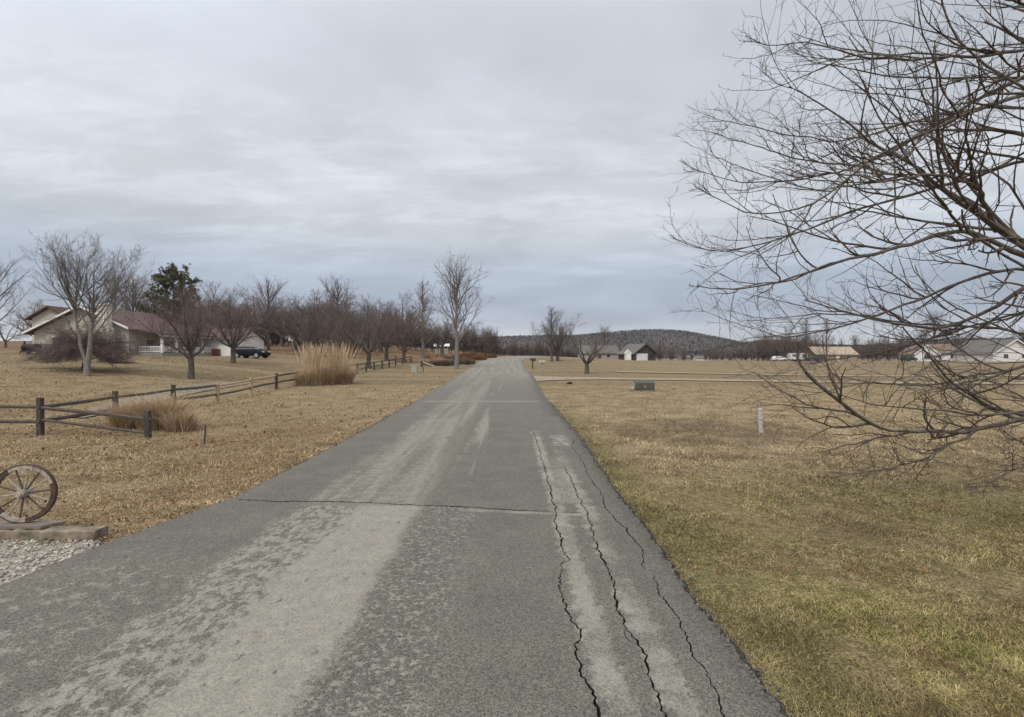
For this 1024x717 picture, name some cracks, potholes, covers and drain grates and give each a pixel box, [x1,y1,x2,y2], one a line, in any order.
crack [533,433,725,717]
